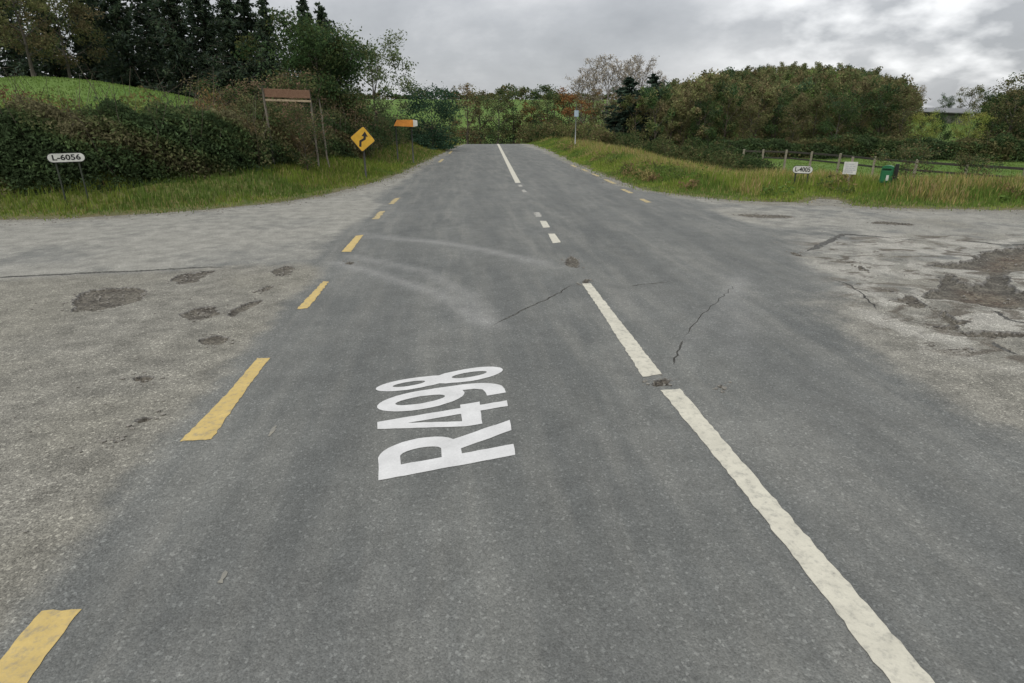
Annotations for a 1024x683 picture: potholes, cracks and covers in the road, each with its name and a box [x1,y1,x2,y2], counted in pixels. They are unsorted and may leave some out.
pothole [563,256,580,268]
crack [491,286,570,326]
pothole [71,287,149,312]
pothole [270,266,295,276]
pothole [651,378,671,387]
crack [805,234,912,252]
crack [673,284,737,363]
pothole [922,246,1024,309]
pothole [179,306,221,320]
pothole [197,335,229,345]
pothole [227,299,263,317]
